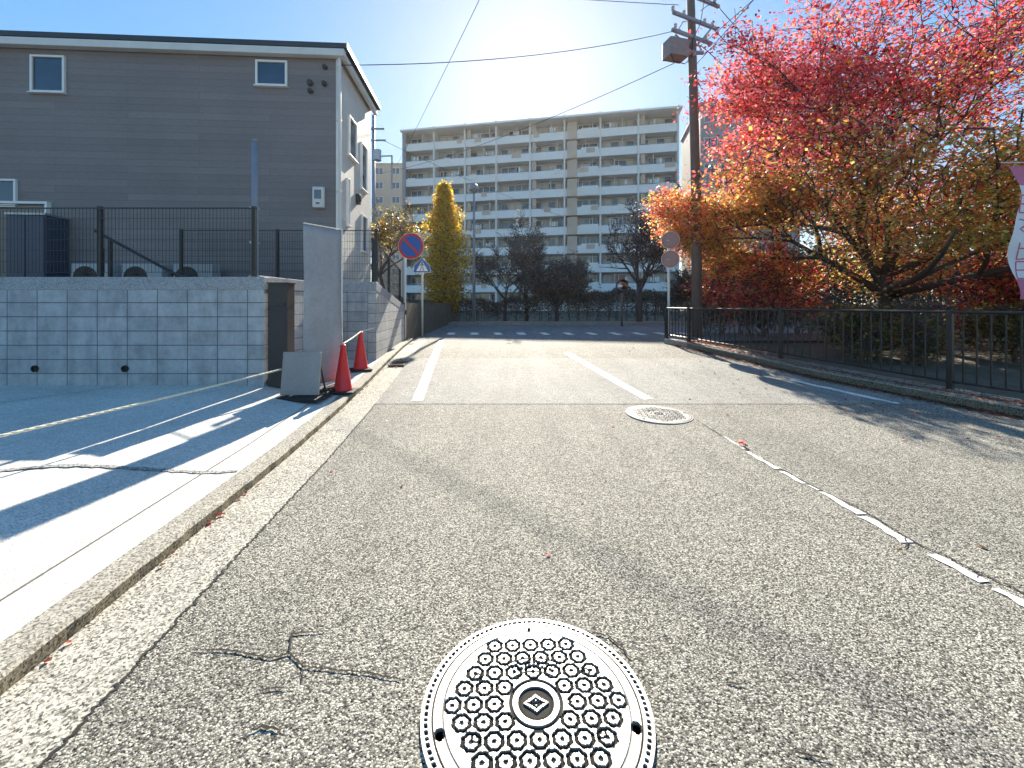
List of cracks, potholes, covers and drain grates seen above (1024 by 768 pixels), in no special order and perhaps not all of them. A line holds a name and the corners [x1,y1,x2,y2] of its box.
crack [200,630,404,690]
manhole cover [420,619,656,768]
manhole cover [626,405,693,424]
